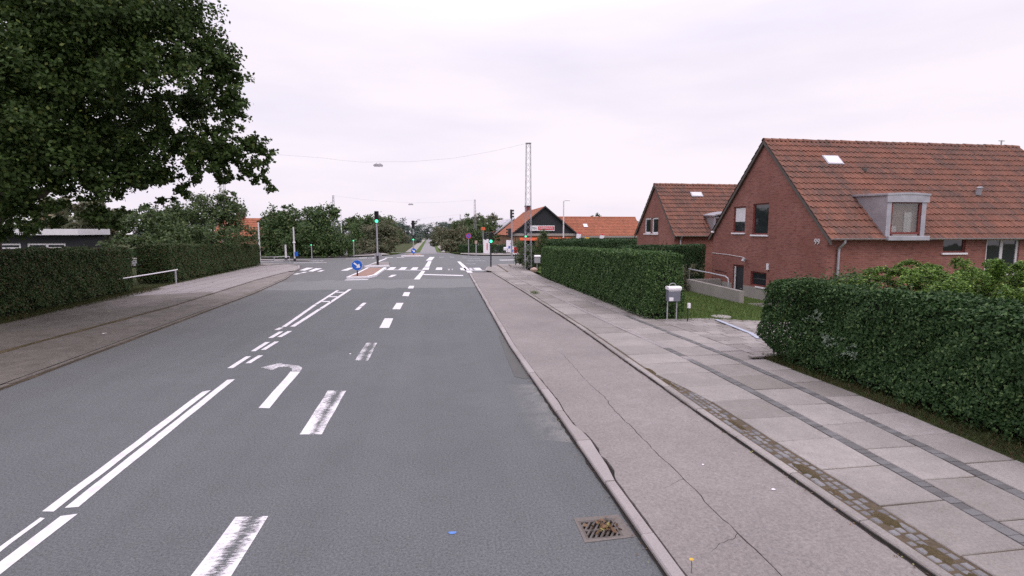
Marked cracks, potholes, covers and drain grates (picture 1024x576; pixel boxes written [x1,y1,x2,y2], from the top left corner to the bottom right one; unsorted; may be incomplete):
drain grate [574,514,635,543]
crack [560,405,649,527]
